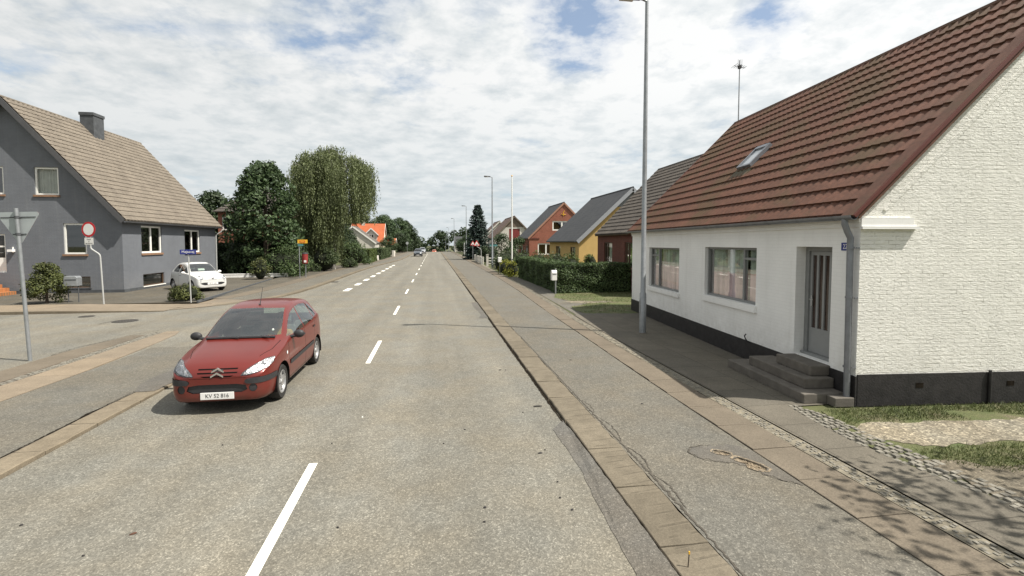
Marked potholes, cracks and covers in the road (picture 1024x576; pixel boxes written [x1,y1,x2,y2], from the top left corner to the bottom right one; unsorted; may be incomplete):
pothole [730,455,772,472]
crack [488,318,799,576]
